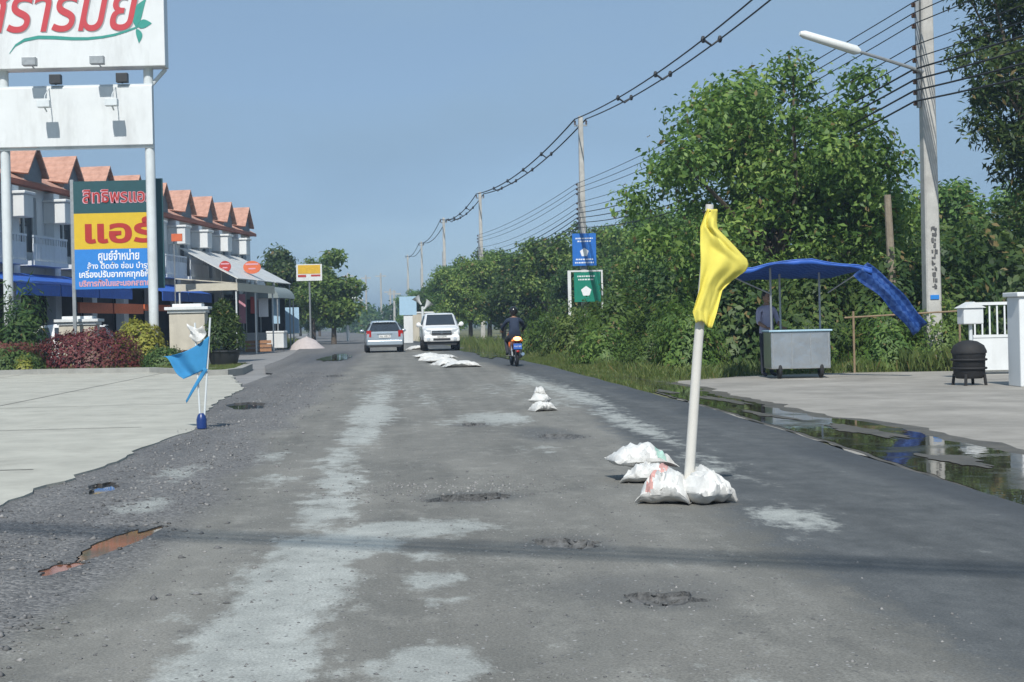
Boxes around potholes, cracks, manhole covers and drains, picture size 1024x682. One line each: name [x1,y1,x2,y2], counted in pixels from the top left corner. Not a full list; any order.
pothole [623,591,710,606]
pothole [88,482,120,494]
pothole [66,522,171,565]
pothole [226,402,265,410]
pothole [425,492,511,502]
pothole [532,537,603,549]
pothole [38,560,90,576]
